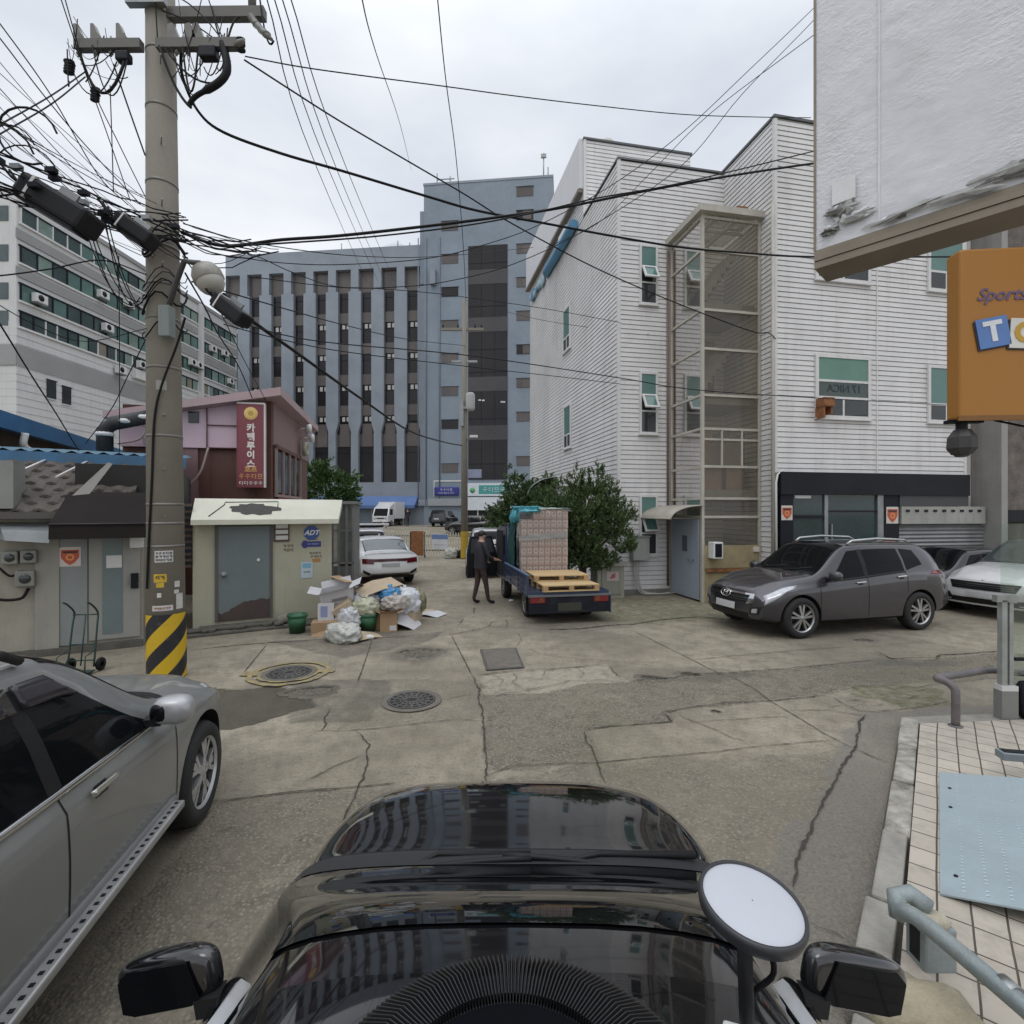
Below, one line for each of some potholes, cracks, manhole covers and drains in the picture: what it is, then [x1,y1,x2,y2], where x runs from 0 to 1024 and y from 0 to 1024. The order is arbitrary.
manhole cover [381,690,442,712]
manhole cover [239,661,336,686]
crack [312,608,997,820]
manhole cover [480,648,524,671]
crack [584,680,968,886]
